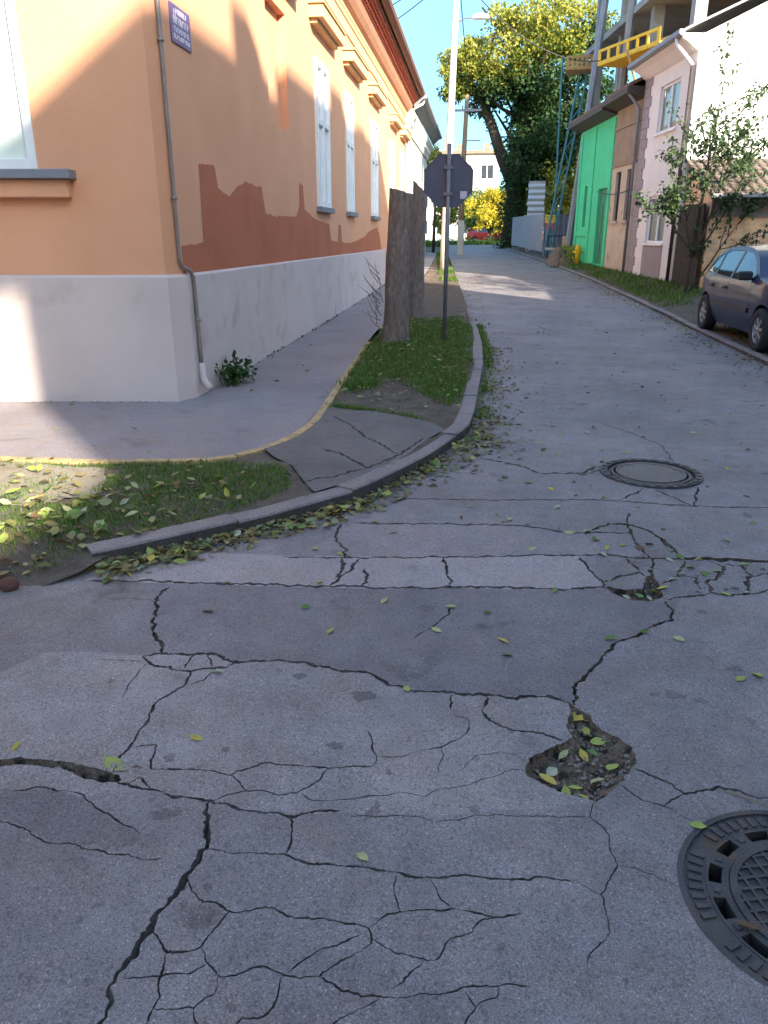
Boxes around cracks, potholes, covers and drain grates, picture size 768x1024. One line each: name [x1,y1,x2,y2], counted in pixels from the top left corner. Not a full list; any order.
pothole [606,576,664,602]
manhole cover [677,810,768,986]
crack [0,488,768,1024]
manhole cover [600,458,704,489]
pothole [525,701,637,802]
crack [480,458,600,475]
